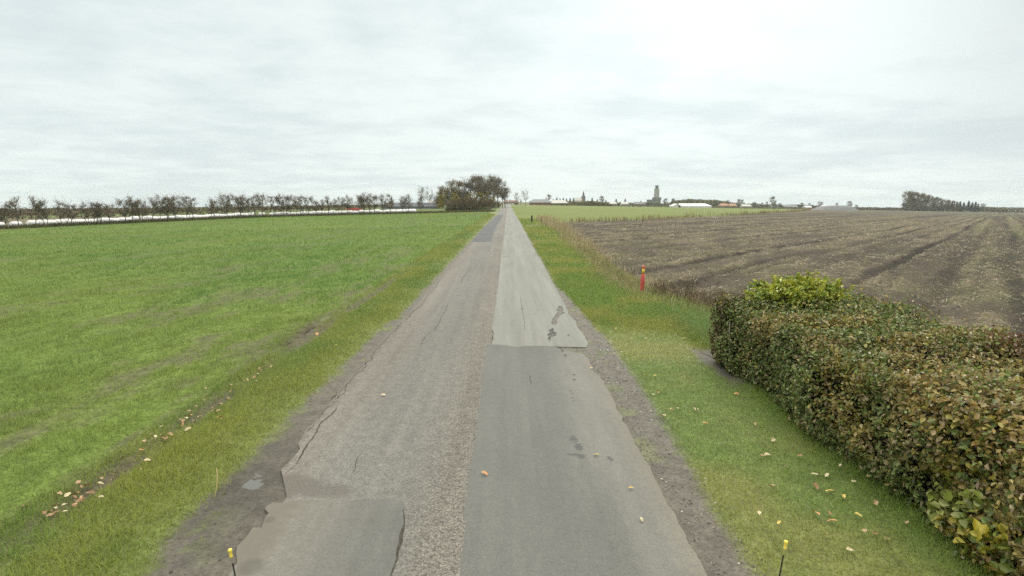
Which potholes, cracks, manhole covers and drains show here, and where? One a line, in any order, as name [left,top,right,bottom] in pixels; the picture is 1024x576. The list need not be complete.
crack [287,283,448,472]
